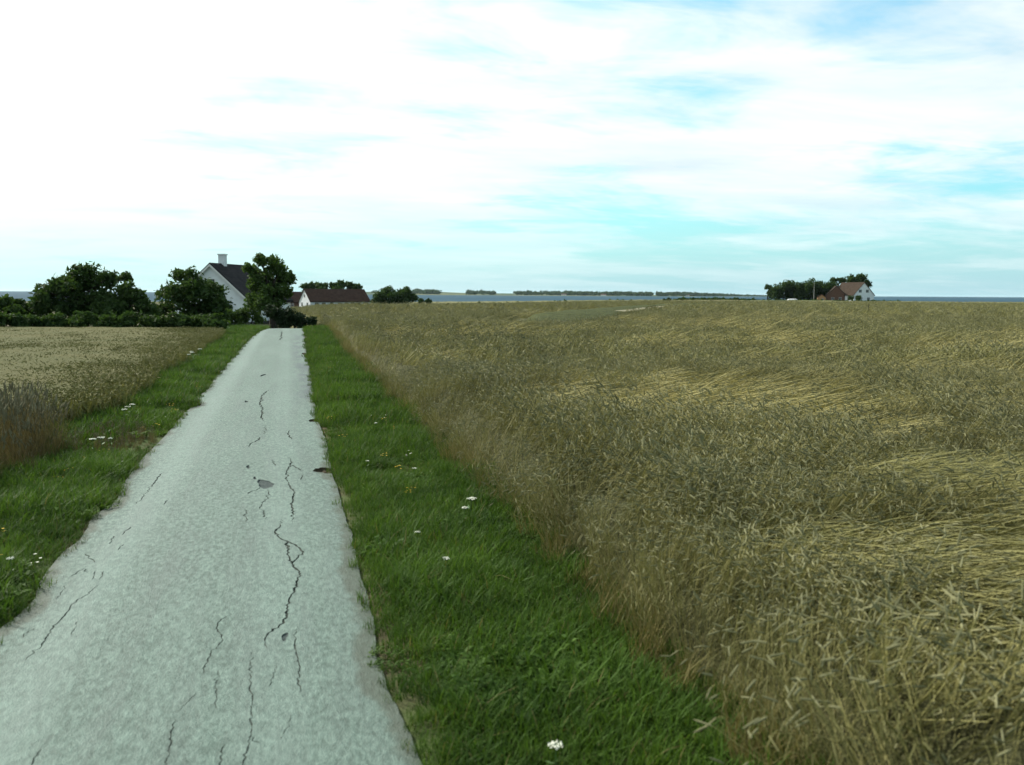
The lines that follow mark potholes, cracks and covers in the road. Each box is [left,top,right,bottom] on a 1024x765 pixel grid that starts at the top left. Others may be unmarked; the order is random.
crack [242,457,304,765]
crack [203,614,231,709]
crack [164,694,196,765]
pothole [257,479,274,489]
crack [249,391,267,447]
crack [22,527,131,659]
